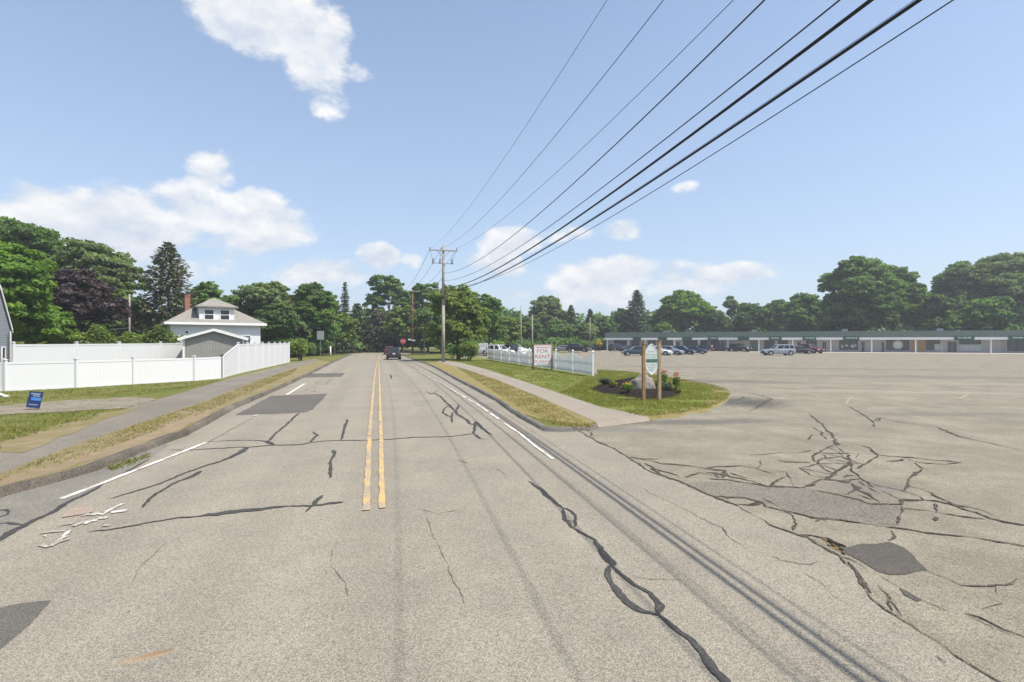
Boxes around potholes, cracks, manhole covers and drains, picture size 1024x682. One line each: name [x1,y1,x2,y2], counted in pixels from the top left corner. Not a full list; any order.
crack [641,487,852,606]
crack [743,407,1024,546]
crack [419,460,505,605]
crack [872,569,1024,636]
pothole [820,537,846,555]
